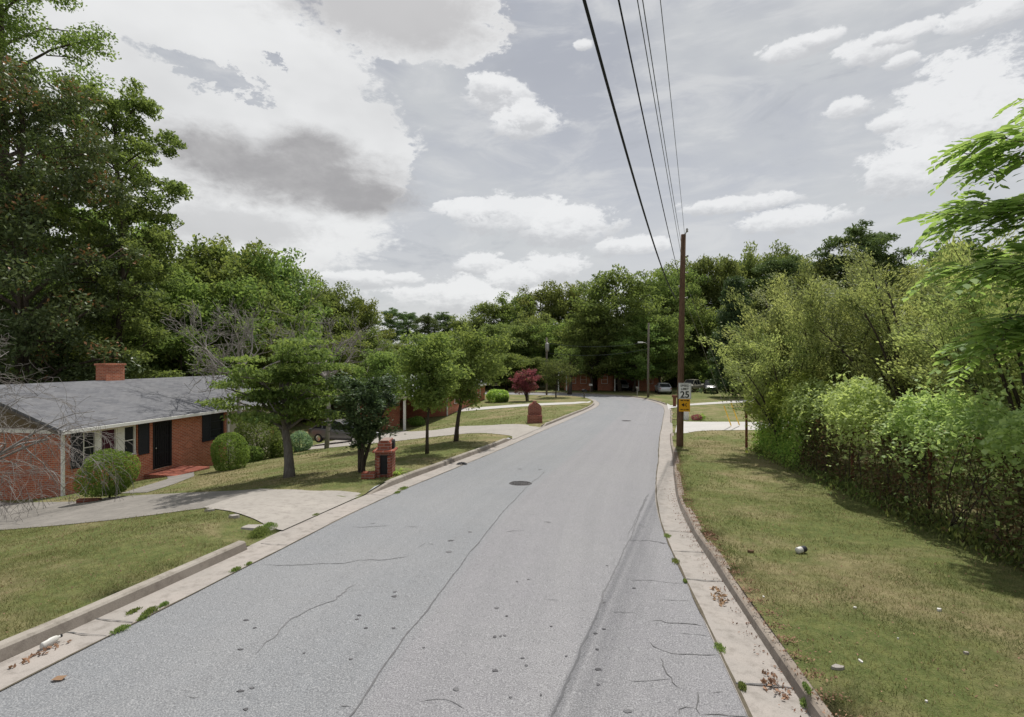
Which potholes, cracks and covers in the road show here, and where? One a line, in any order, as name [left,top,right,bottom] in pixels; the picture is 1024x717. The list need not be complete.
crack [0,409,592,691]
crack [628,405,753,717]
